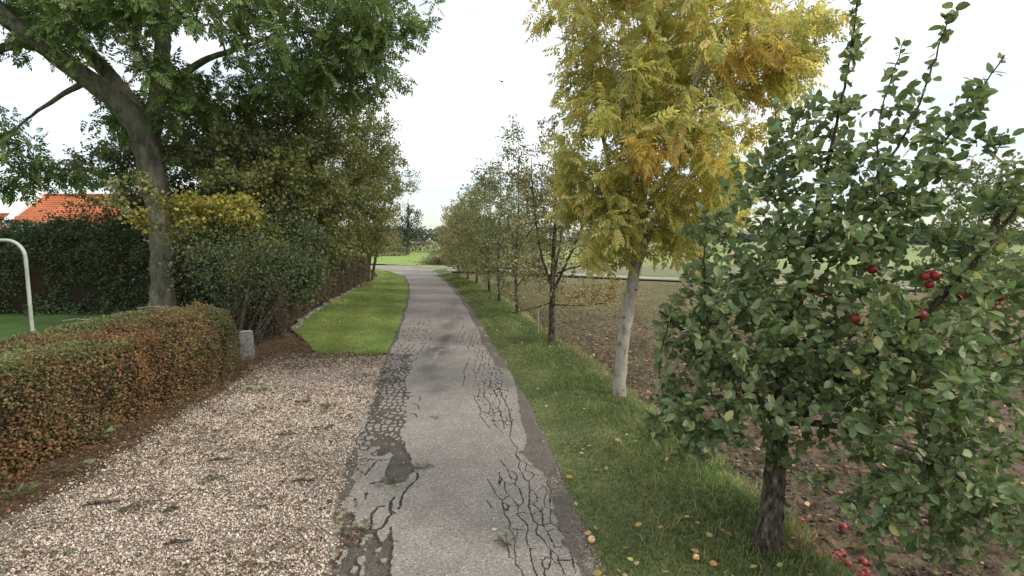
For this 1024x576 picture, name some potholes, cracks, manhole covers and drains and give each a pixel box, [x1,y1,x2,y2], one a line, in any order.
pothole [384,442,415,485]
crack [453,313,576,576]
crack [353,320,433,531]
